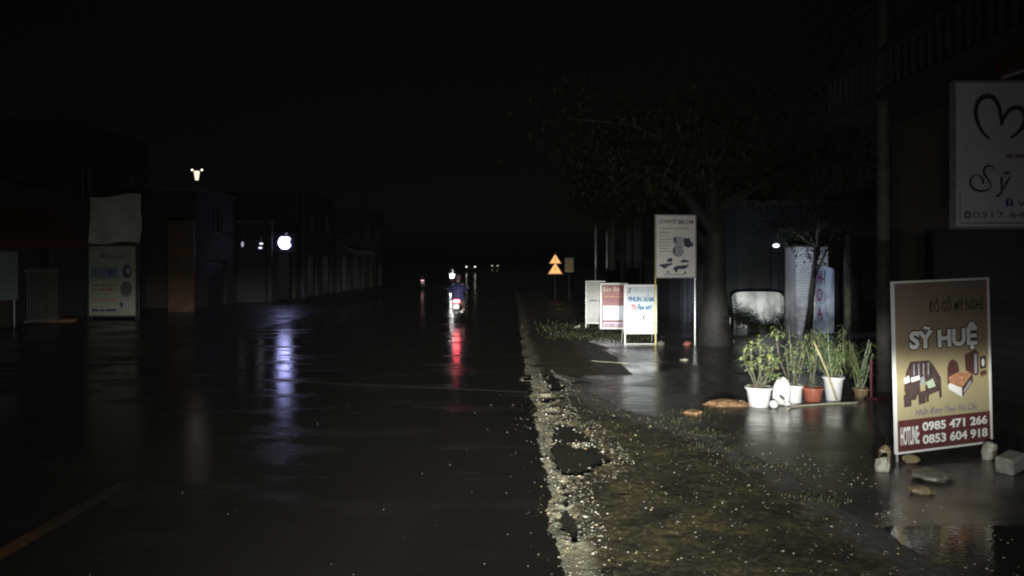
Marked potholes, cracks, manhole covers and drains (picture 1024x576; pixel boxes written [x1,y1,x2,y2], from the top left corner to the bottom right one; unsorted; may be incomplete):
pothole [537,372,571,392]
pothole [548,476,593,547]
pothole [541,418,621,479]
